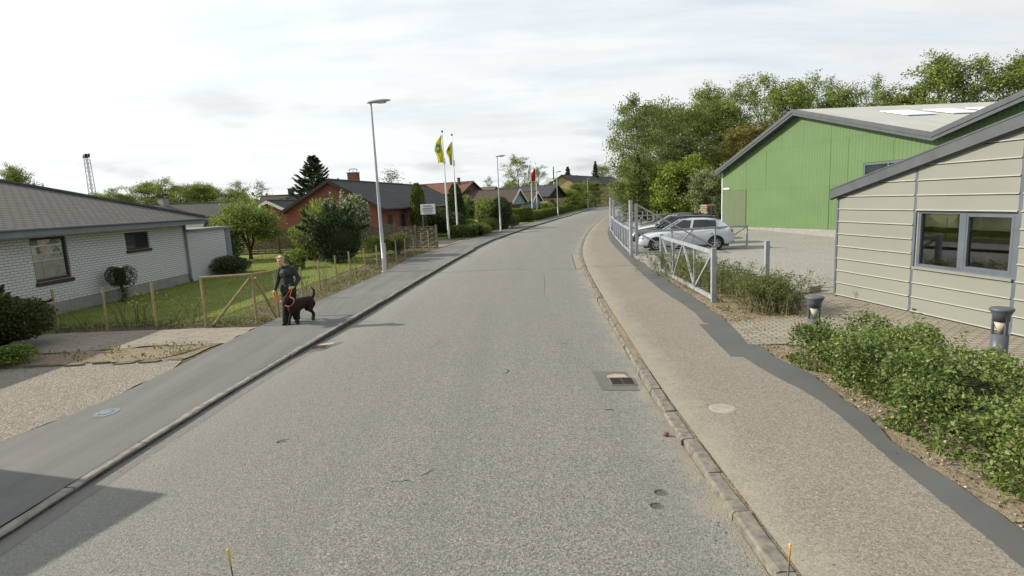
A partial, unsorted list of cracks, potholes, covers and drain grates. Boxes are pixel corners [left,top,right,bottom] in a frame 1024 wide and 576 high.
manhole cover [93,408,121,417]
drain grate [592,371,640,391]
manhole cover [709,404,736,413]
